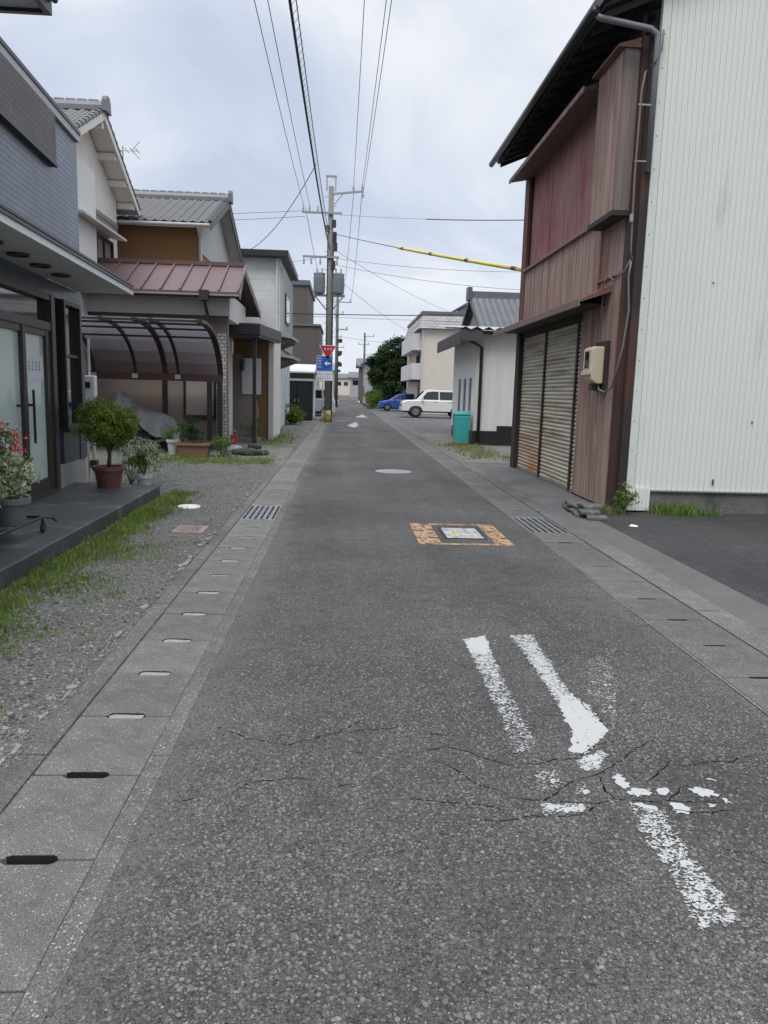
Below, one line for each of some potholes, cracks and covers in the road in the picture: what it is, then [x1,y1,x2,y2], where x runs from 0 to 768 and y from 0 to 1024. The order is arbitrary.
manhole cover [438,527,488,540]
crack [232,778,309,794]
crack [406,692,757,821]
drain grate [511,517,569,533]
crack [219,720,396,745]
drain grate [241,505,282,520]
